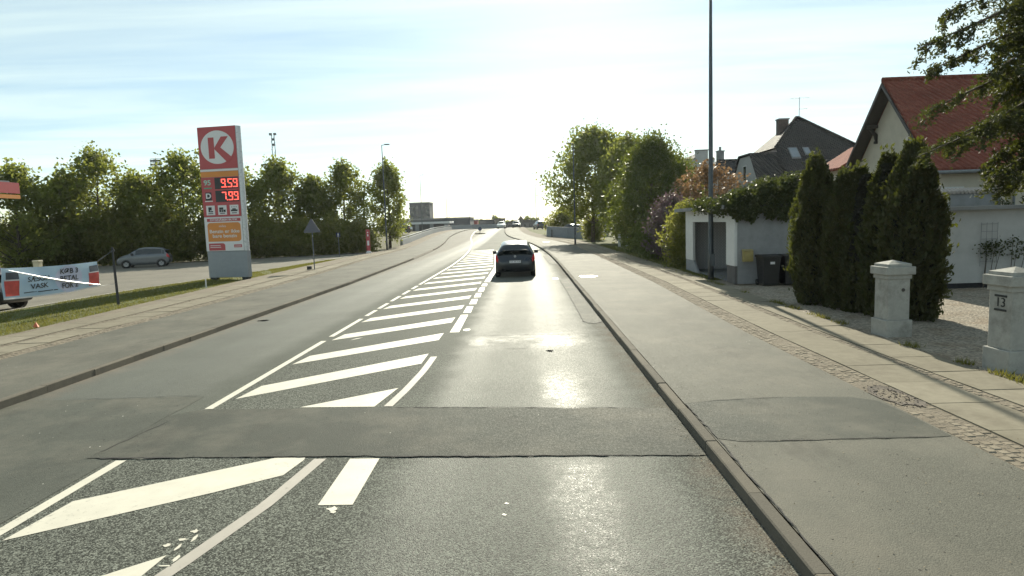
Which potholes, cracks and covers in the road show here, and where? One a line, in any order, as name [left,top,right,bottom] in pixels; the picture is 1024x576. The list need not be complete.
pothole [863,385,927,408]
